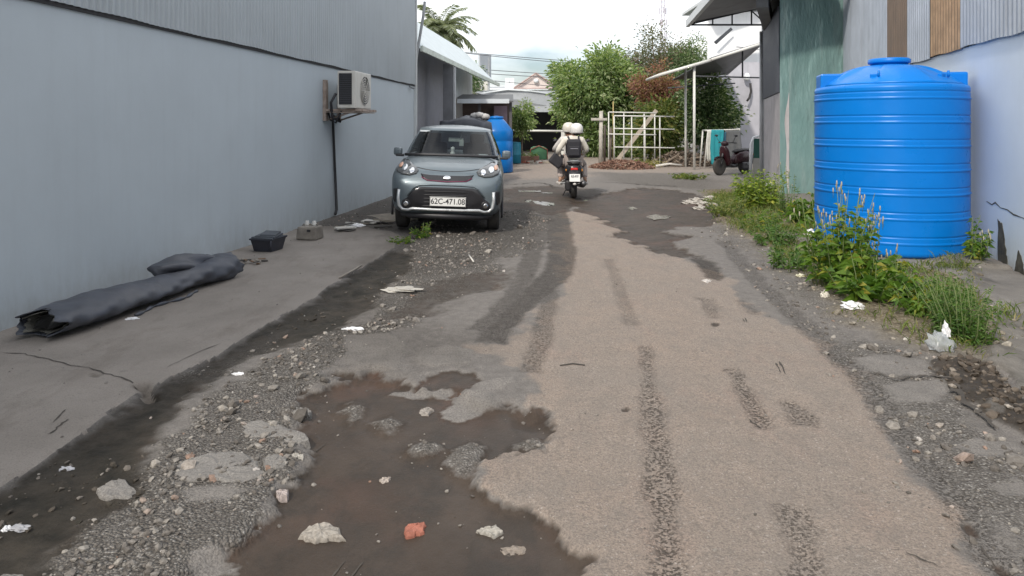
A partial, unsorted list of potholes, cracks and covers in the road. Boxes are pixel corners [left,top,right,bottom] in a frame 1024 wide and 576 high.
pothole [187,369,597,576]
crack [873,372,997,429]
